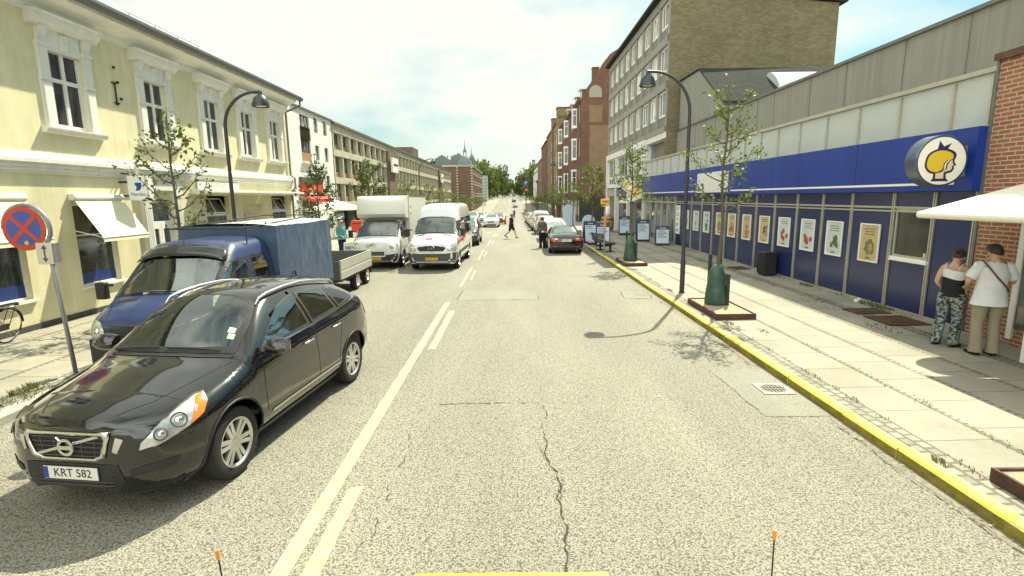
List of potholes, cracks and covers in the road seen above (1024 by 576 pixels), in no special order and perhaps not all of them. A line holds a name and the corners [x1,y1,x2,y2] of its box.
drain grate [751,383,796,395]
crack [346,379,569,572]
